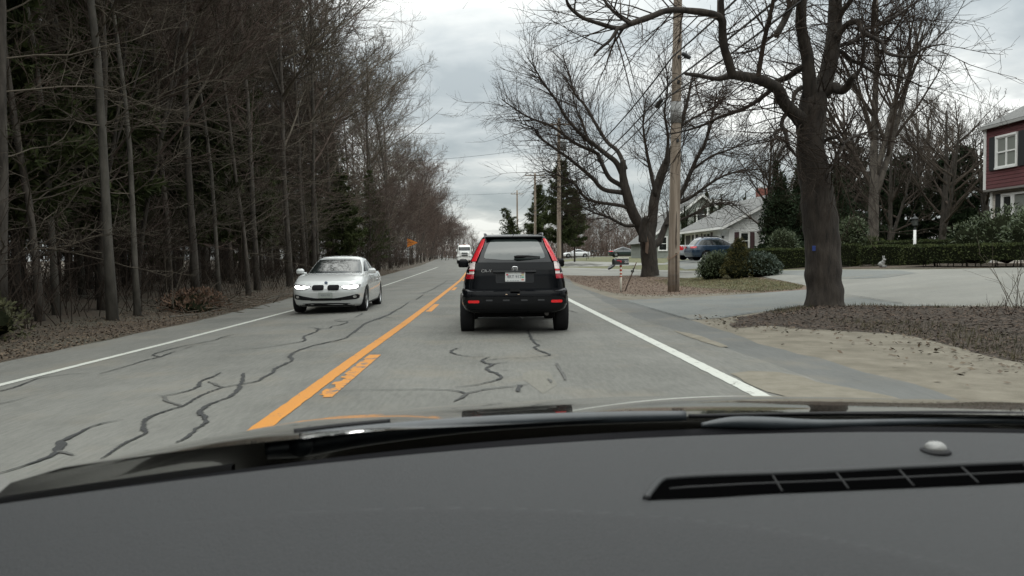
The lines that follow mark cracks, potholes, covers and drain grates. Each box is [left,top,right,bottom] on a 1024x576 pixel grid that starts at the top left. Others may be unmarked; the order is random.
crack [342,330,566,401]
crack [99,281,446,459]
